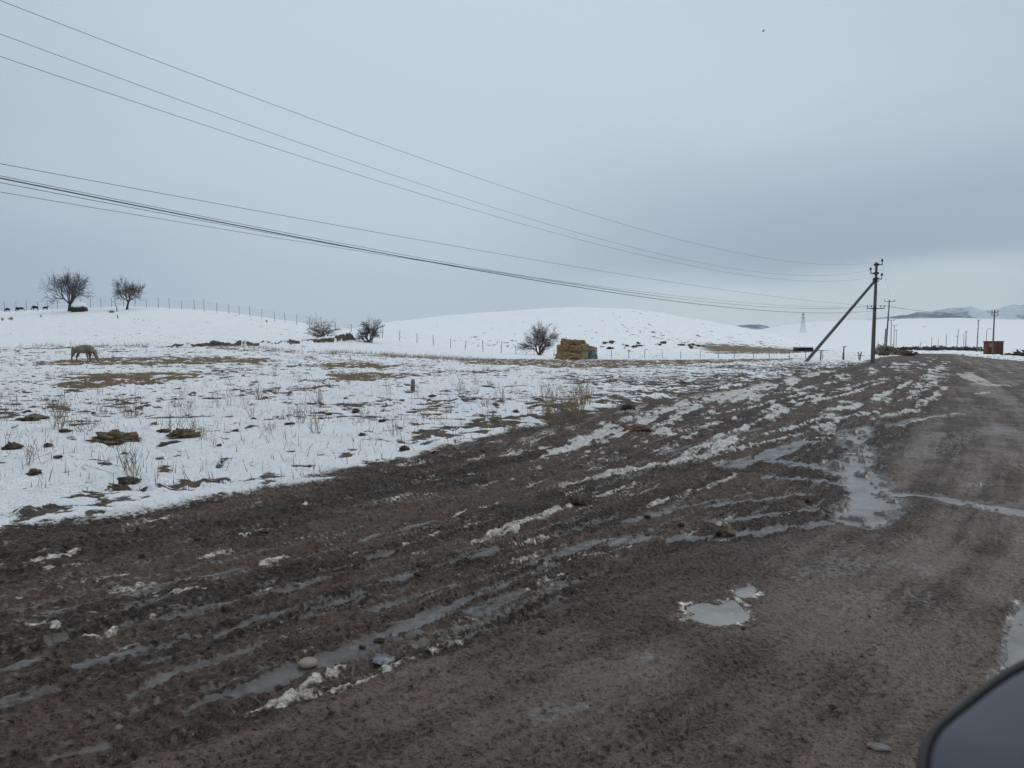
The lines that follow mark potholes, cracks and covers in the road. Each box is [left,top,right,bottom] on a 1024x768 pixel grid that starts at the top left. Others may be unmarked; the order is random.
pothole [722,579,770,603]
pothole [663,595,765,630]
